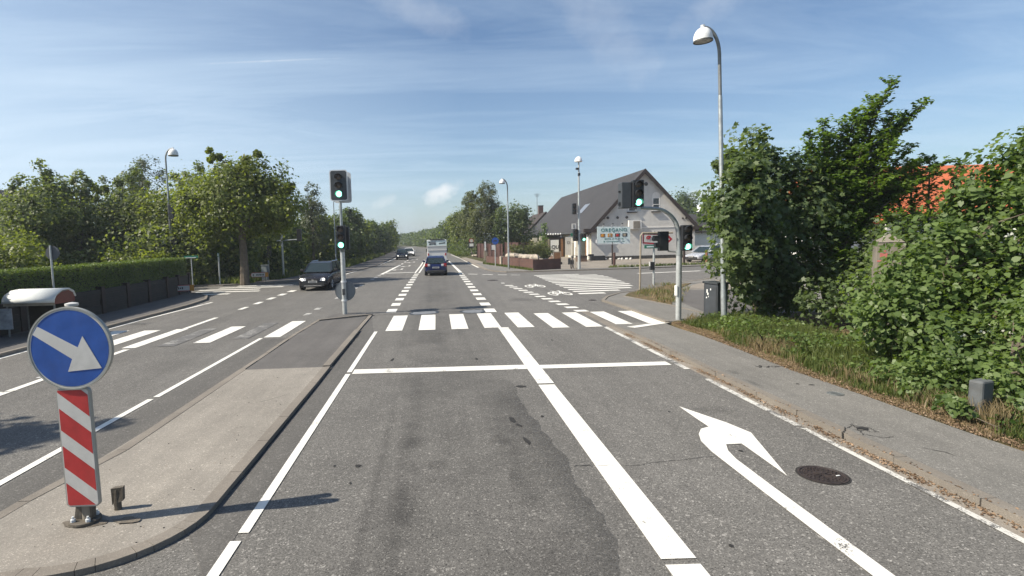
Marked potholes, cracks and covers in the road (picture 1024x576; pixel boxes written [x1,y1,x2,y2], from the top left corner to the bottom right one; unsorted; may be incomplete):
manhole cover [795,465,852,485]
